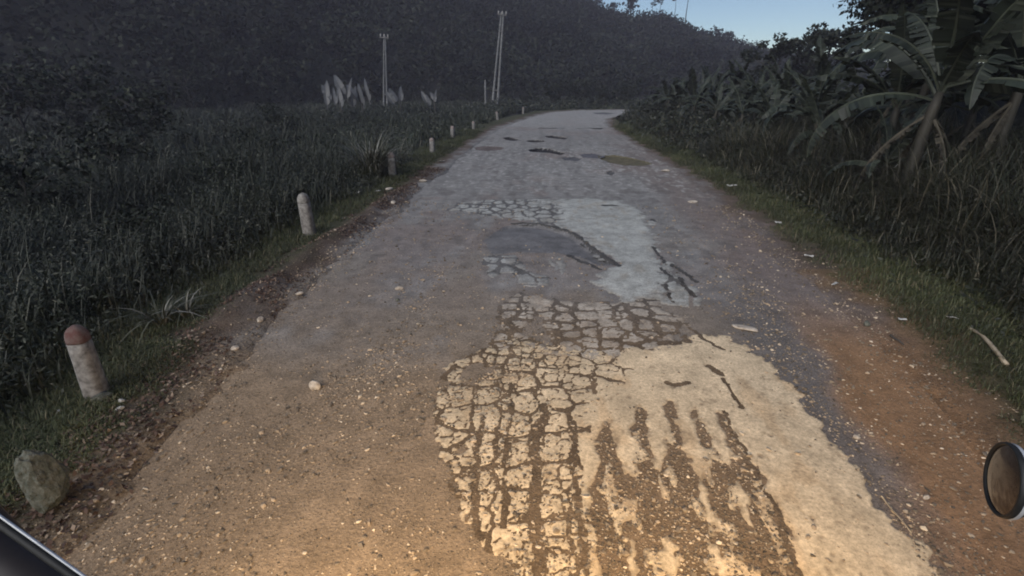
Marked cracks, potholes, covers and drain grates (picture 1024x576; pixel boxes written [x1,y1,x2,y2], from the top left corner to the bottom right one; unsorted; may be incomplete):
crack [433,199,804,576]
